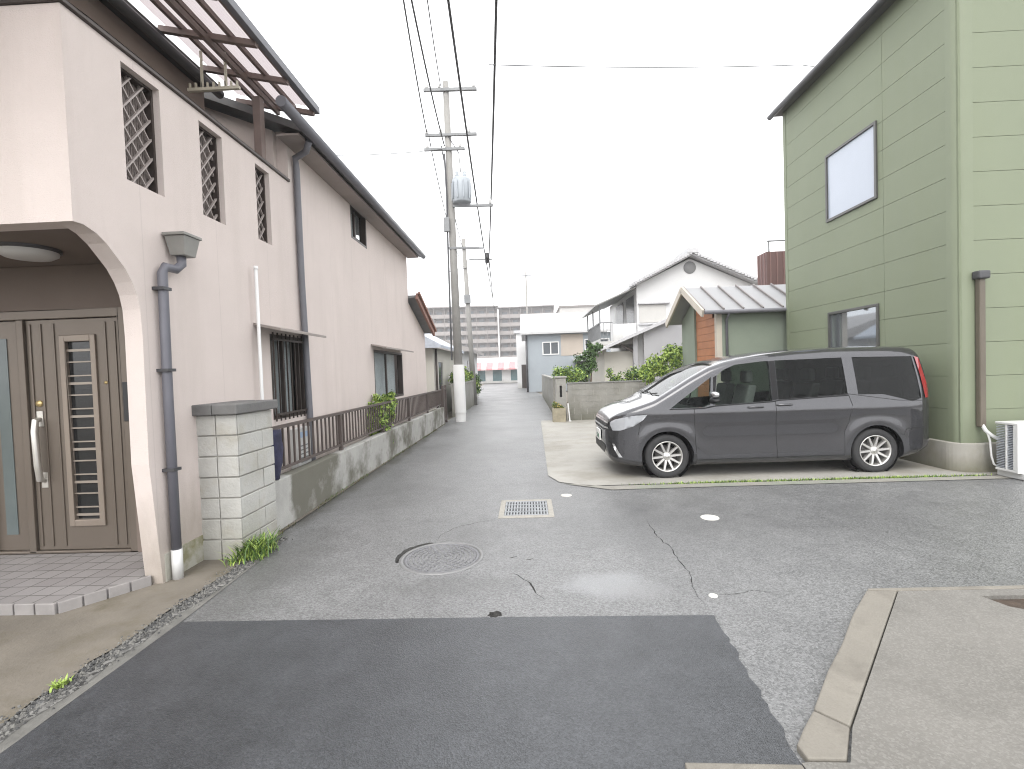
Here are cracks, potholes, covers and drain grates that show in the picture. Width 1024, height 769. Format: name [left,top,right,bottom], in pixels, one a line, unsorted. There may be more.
manhole cover [399,542,484,575]
drain grate [498,499,555,518]
crack [649,525,770,609]
